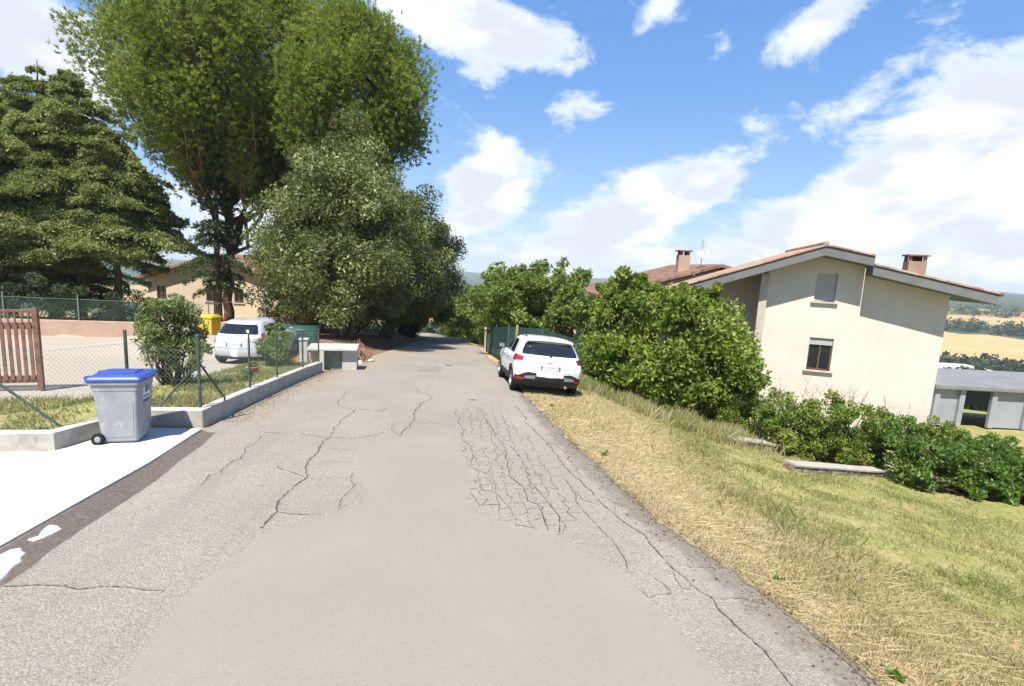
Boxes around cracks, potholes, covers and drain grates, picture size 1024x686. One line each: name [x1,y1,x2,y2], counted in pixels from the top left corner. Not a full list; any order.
crack [0,583,165,594]
crack [199,389,796,686]
